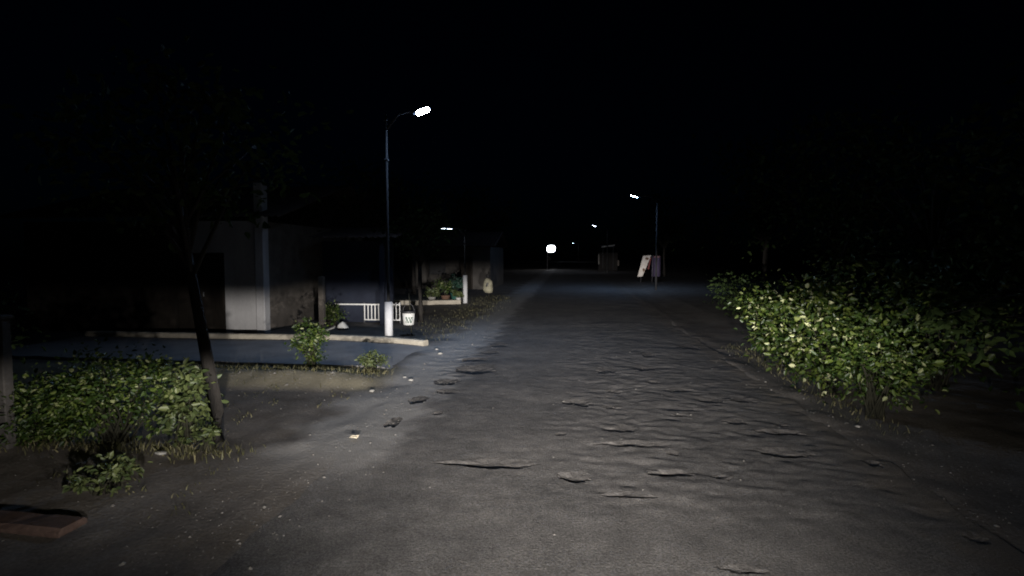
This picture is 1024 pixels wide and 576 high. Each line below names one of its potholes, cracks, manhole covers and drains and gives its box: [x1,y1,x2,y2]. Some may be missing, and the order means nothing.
pothole [717,564,771,574]
pothole [753,428,806,436]
pothole [408,396,429,404]
pothole [748,446,816,459]
pothole [556,470,592,484]
pothole [960,530,992,545]
pothole [600,491,657,499]
pothole [384,417,403,428]
pothole [646,469,699,477]
pothole [455,364,498,375]
pothole [435,457,540,469]
pothole [561,399,594,407]
